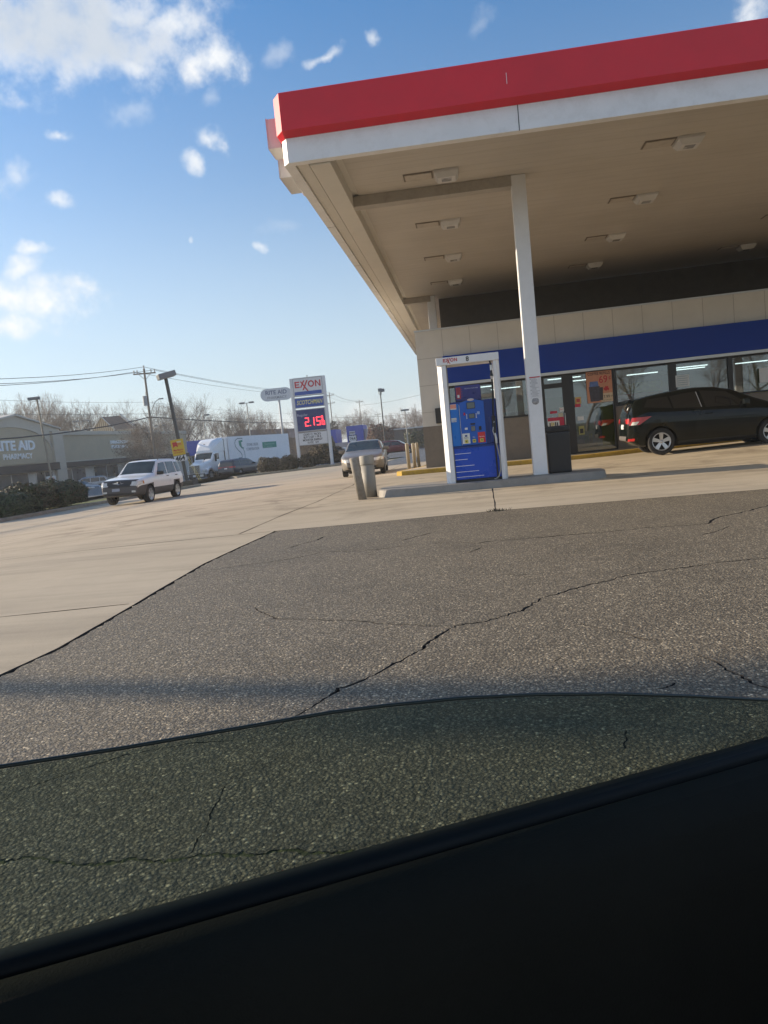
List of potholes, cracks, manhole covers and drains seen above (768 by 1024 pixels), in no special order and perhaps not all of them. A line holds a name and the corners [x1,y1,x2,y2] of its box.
crack [212,505,768,570]
crack [12,558,768,793]
